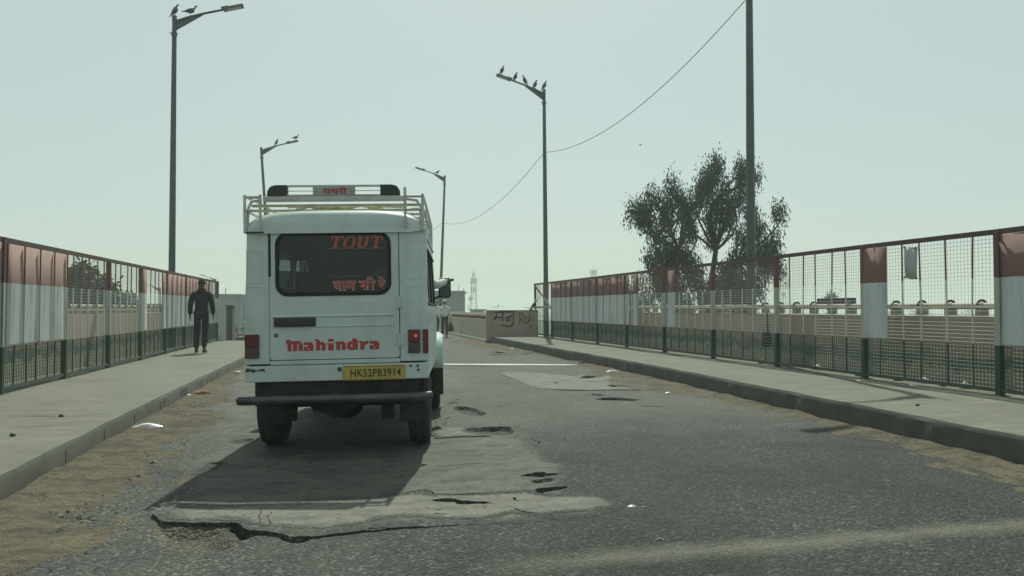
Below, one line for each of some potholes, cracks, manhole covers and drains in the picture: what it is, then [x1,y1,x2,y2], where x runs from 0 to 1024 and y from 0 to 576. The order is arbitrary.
pothole [151,520,239,553]
pothole [534,486,568,494]
pothole [467,427,514,435]
pothole [454,406,486,416]
